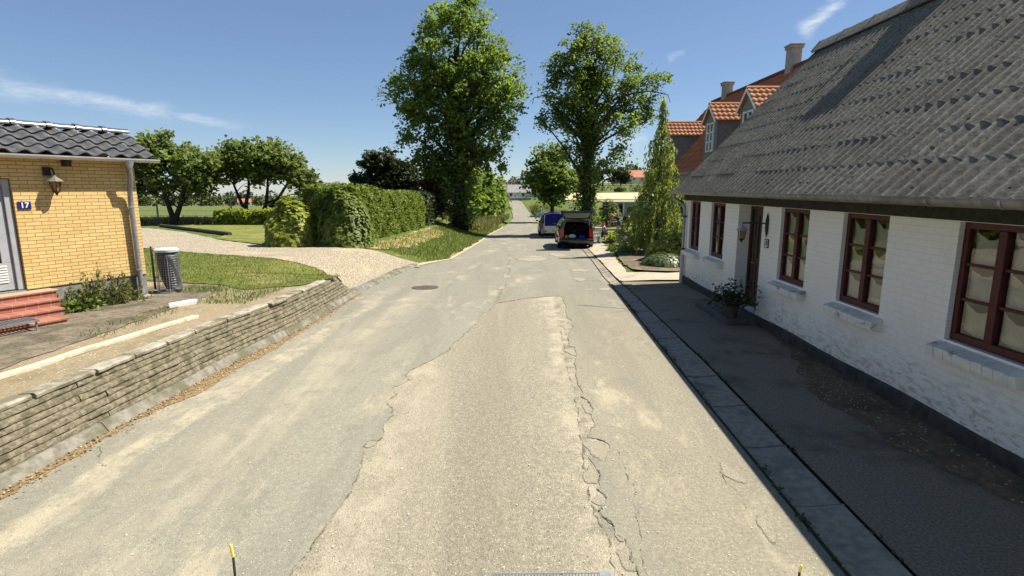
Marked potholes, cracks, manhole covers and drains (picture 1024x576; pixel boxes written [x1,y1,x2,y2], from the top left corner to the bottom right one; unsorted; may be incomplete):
crack [289,309,490,576]
crack [565,306,648,575]
